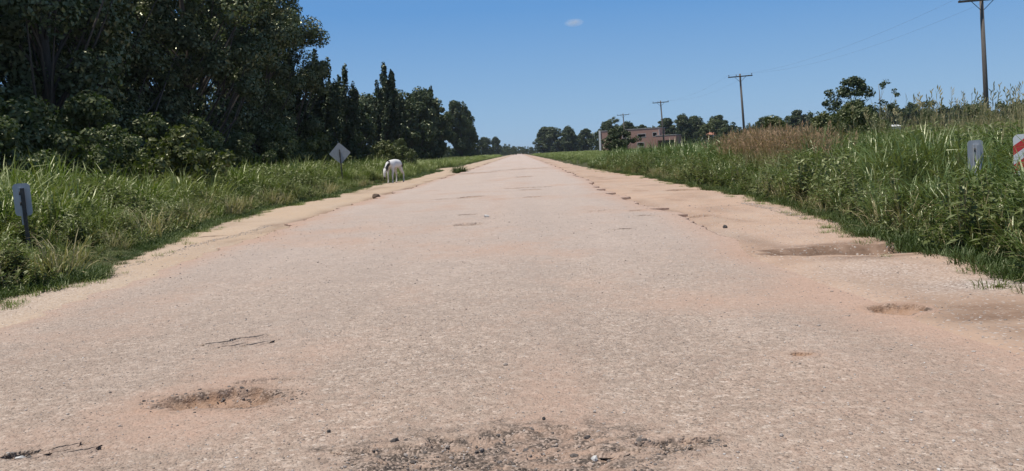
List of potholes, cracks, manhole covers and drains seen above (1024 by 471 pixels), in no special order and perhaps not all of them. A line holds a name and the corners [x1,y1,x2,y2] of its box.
pothole [858,301,941,318]
pothole [135,384,295,415]
pothole [780,350,823,359]
pothole [594,433,728,461]
pothole [752,242,917,257]
pothole [327,422,666,471]
crack [39,441,100,457]
crack [204,334,275,349]
